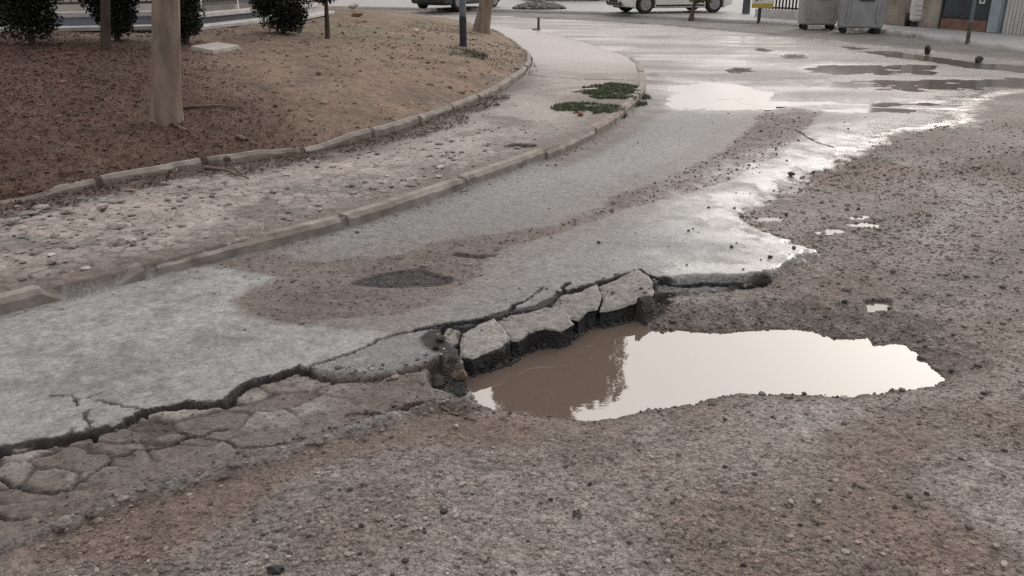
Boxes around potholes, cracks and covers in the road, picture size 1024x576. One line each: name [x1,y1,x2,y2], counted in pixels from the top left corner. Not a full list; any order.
crack [0,318,490,496]
pothole [453,282,951,424]
crack [508,272,630,316]
crack [793,129,834,148]
